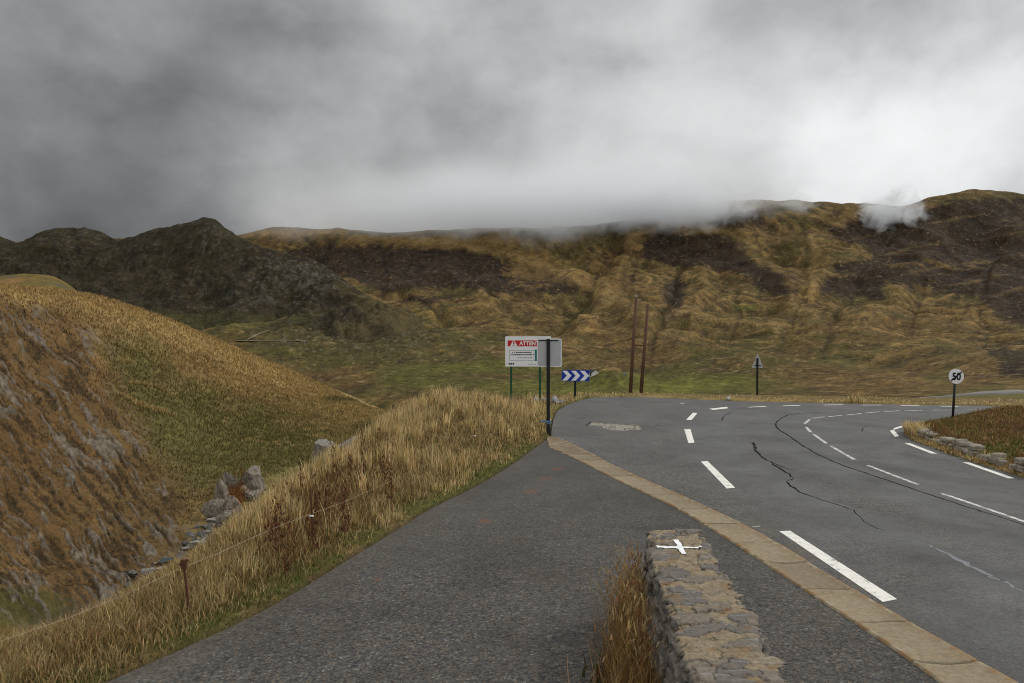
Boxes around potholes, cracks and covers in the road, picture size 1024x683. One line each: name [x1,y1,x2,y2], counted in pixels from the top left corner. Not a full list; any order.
crack [752,412,1024,531]
